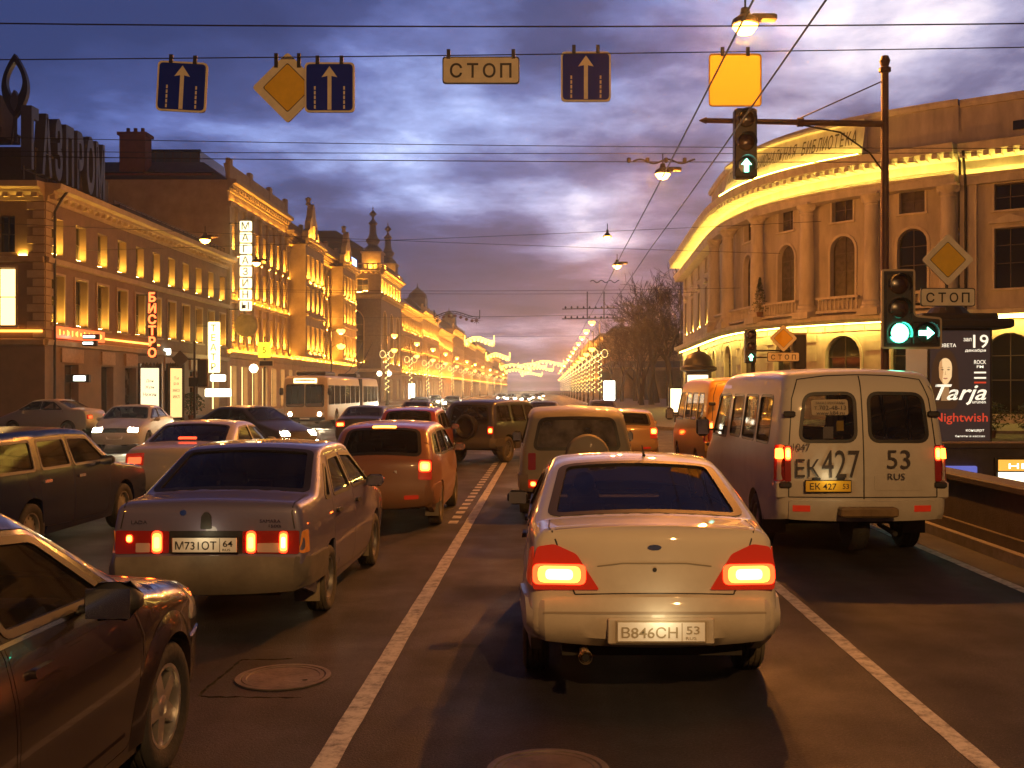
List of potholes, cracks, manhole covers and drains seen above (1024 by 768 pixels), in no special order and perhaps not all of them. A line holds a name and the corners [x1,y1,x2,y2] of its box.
manhole cover [487,748,609,768]
manhole cover [235,664,331,691]
